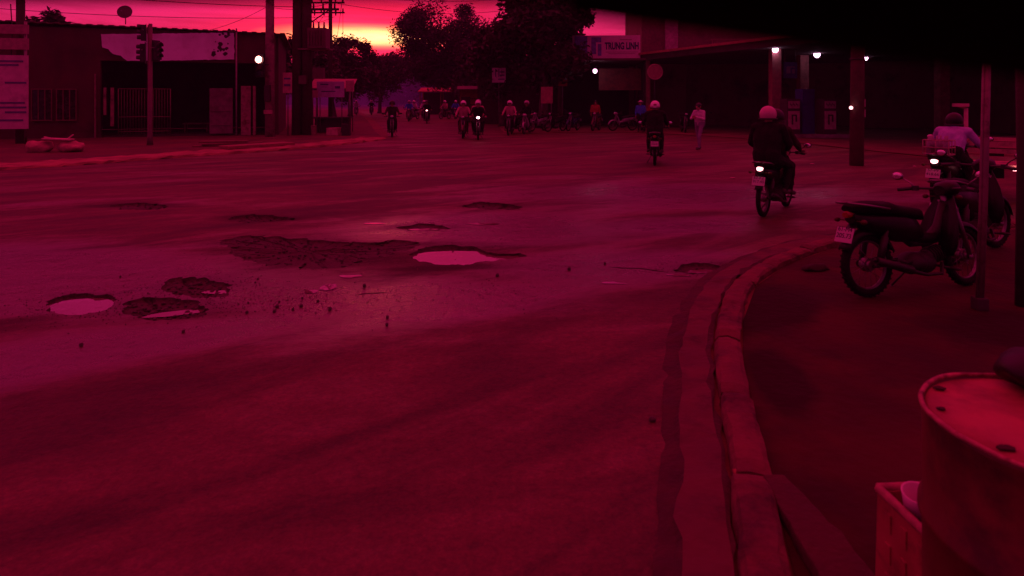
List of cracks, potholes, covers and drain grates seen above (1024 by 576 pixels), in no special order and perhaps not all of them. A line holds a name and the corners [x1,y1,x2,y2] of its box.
pothole [673,262,720,274]
pothole [161,277,233,298]
pothole [396,223,451,231]
pothole [409,245,526,265]
pothole [46,293,118,315]
pothole [219,235,423,270]
pothole [228,214,295,223]
pothole [122,297,209,321]
pothole [462,202,523,210]
